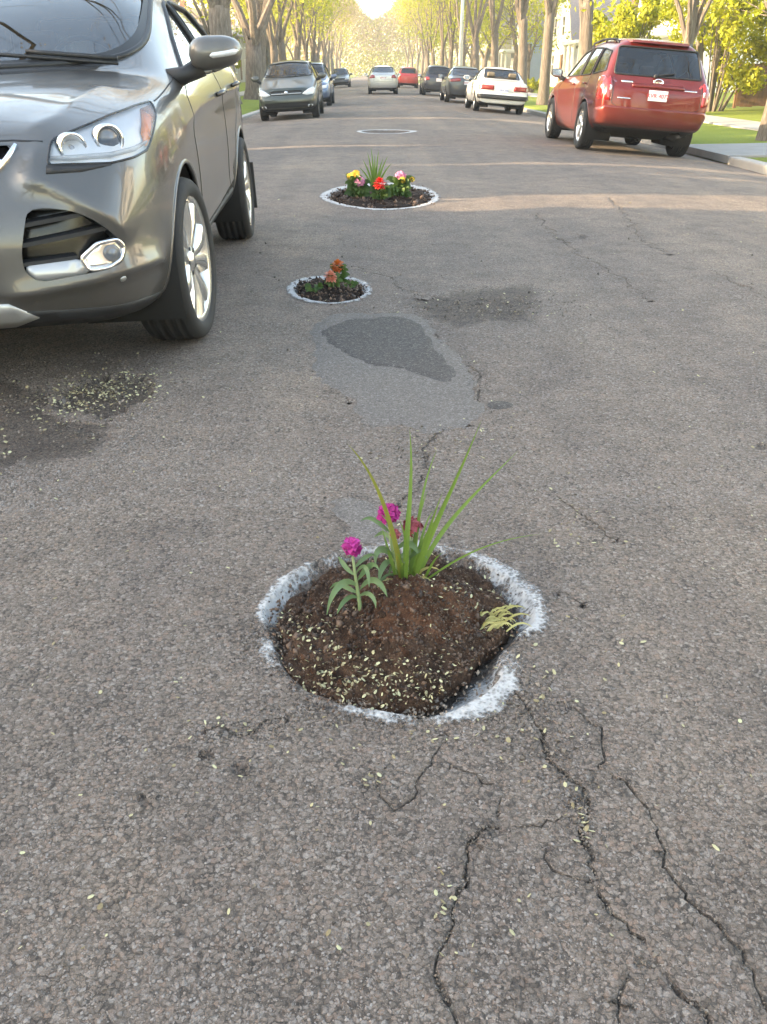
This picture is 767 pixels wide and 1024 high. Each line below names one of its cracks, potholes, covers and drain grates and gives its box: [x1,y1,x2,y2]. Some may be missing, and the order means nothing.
pothole [320,183,439,210]
crack [162,198,767,1024]
pothole [286,275,373,305]
pothole [253,541,545,733]
